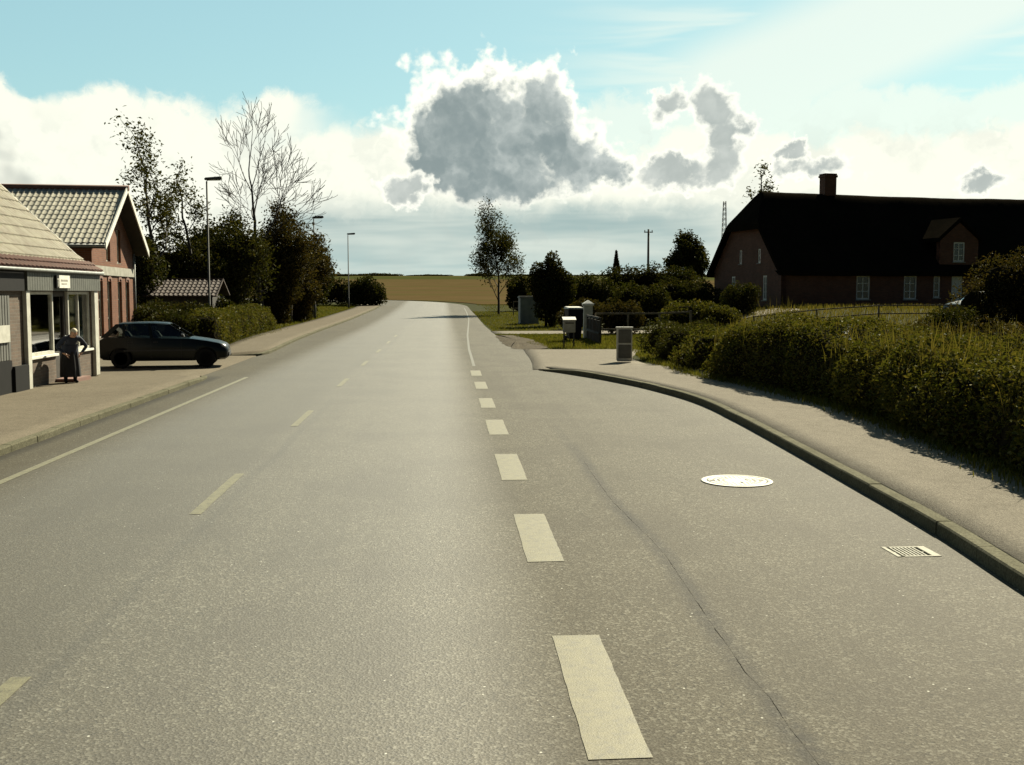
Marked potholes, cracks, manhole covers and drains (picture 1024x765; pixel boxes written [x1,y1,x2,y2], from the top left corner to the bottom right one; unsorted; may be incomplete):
manhole cover [701,475,773,488]
crack [588,468,819,765]
drain grate [881,546,942,557]
